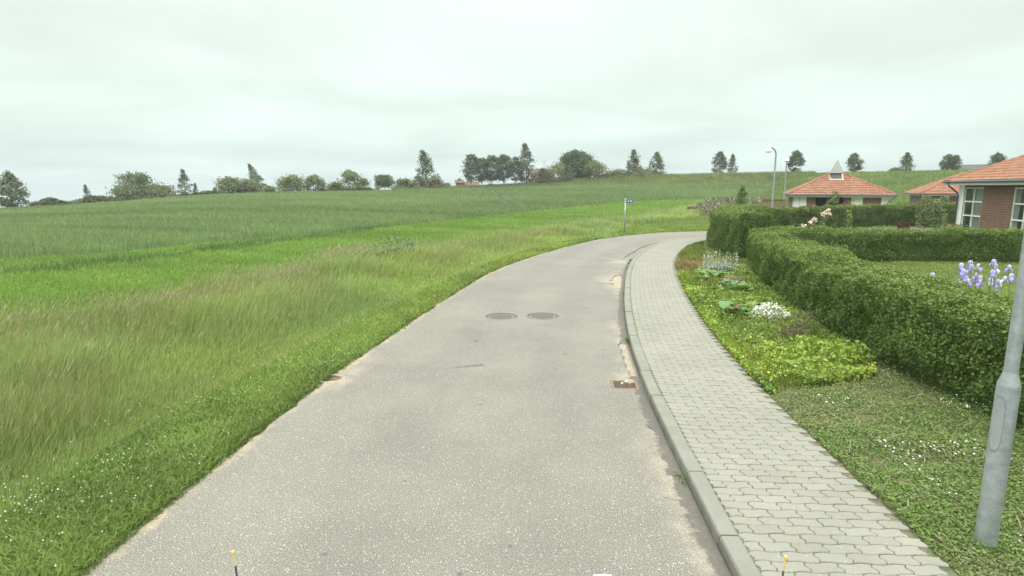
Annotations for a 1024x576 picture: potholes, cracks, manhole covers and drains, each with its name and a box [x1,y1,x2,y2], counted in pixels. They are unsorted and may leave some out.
drain grate [610,379,640,390]
manhole cover [525,312,560,320]
manhole cover [319,374,347,384]
